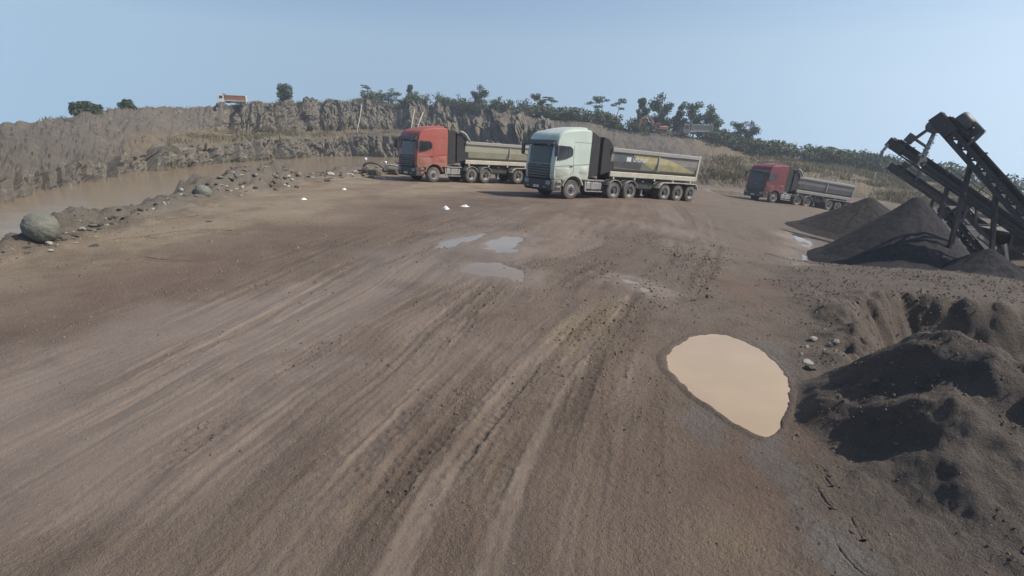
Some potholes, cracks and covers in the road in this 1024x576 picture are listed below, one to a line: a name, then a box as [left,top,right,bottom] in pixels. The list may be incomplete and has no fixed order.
pothole [655,332,800,444]
crack [811,465,870,576]
